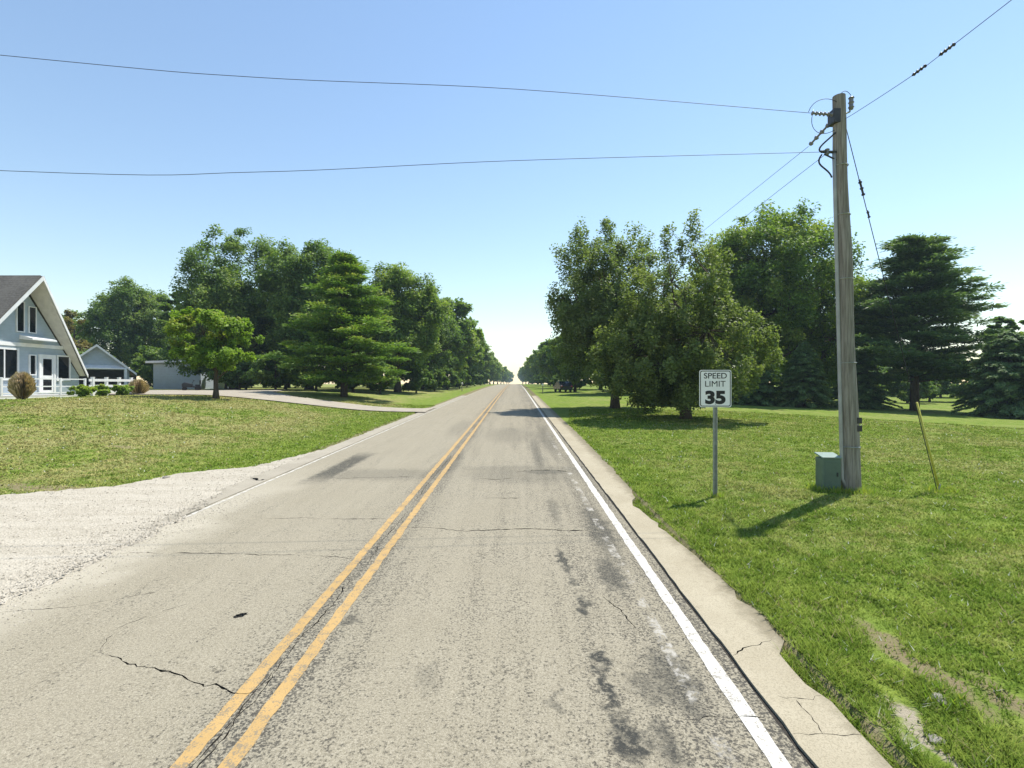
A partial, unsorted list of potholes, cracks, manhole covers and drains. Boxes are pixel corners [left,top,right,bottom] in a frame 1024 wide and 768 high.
crack [783,695,860,736]
crack [11,456,451,768]
